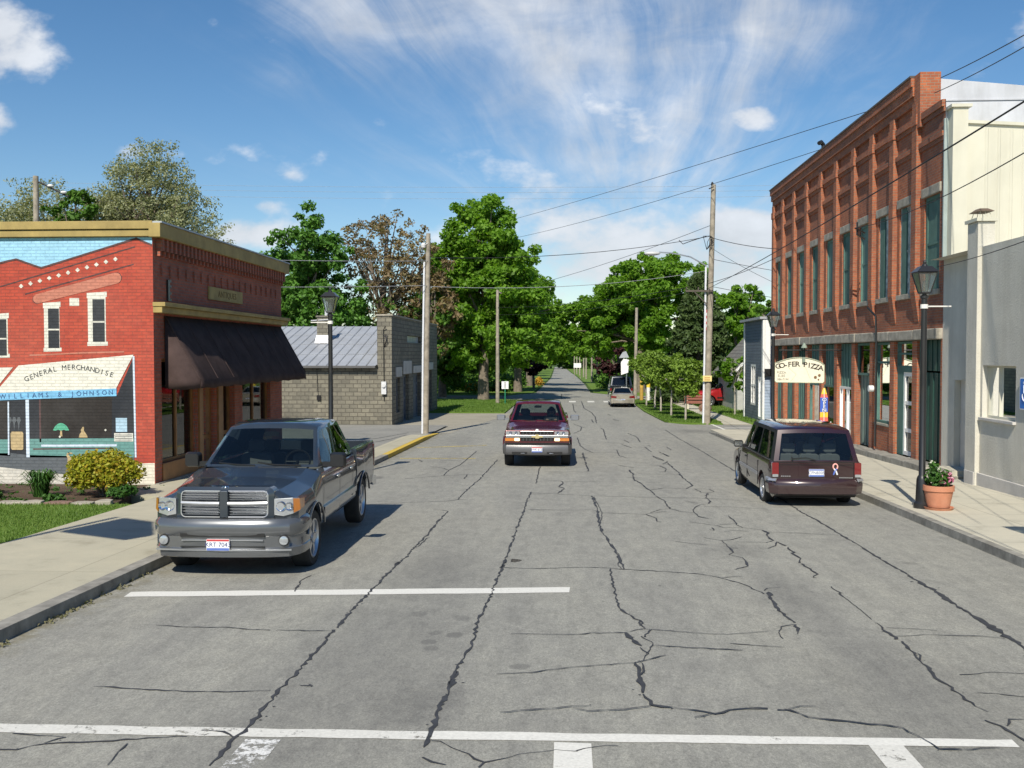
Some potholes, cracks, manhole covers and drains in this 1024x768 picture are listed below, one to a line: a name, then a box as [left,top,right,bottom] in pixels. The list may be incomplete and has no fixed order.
crack [366,451,498,505]
crack [496,394,1024,751]
